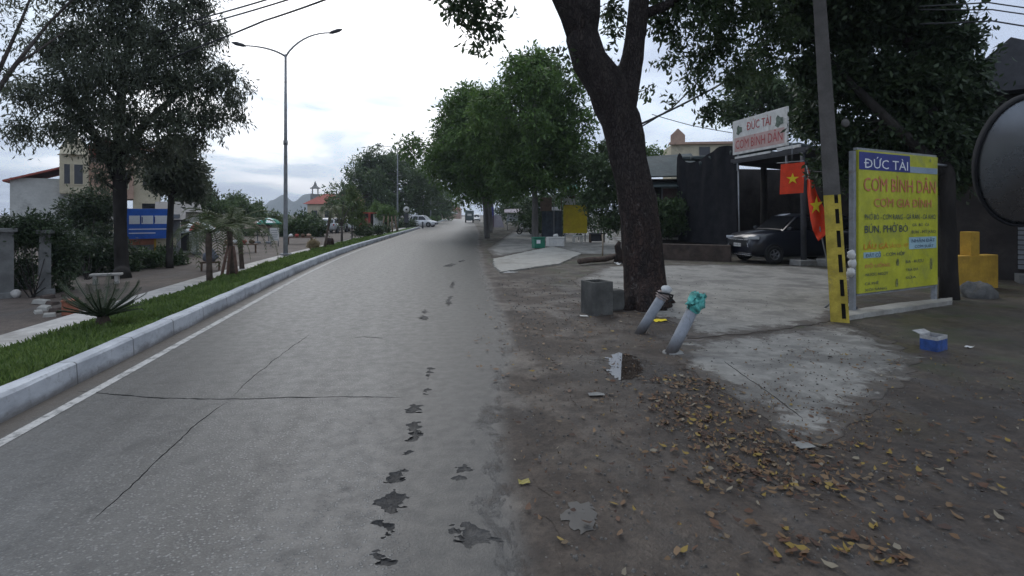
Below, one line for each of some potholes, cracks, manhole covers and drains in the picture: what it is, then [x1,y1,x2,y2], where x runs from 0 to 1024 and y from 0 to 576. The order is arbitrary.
pothole [383,468,409,484]
crack [79,337,398,518]
pothole [405,421,424,442]
pothole [372,489,410,514]
pothole [369,549,398,566]
pothole [448,521,504,549]
